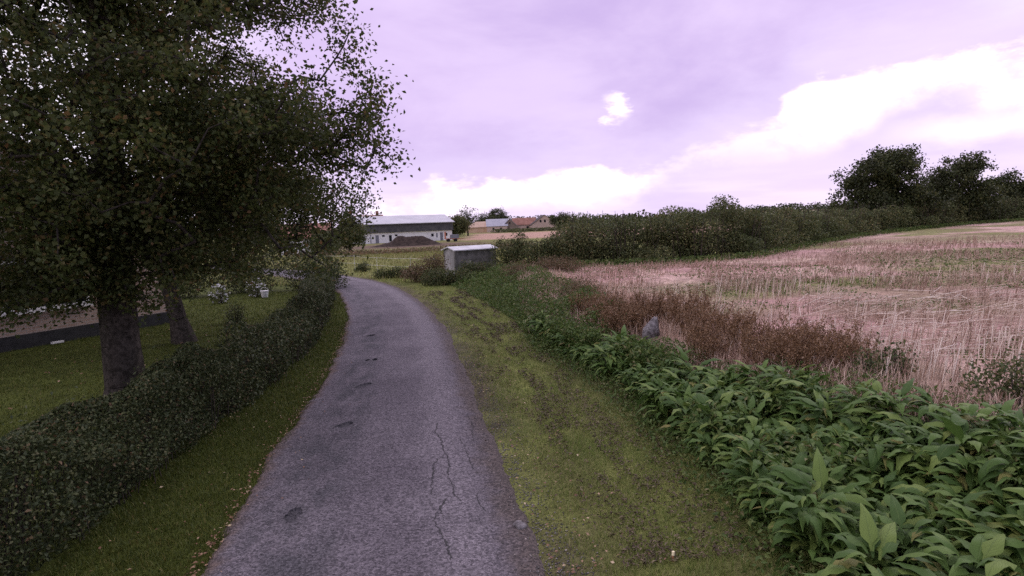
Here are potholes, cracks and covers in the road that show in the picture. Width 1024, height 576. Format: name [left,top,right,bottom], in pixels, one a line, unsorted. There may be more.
crack [430,414,488,560]
pothole [350,381,377,390]
pothole [329,419,358,430]
pothole [278,502,308,528]
